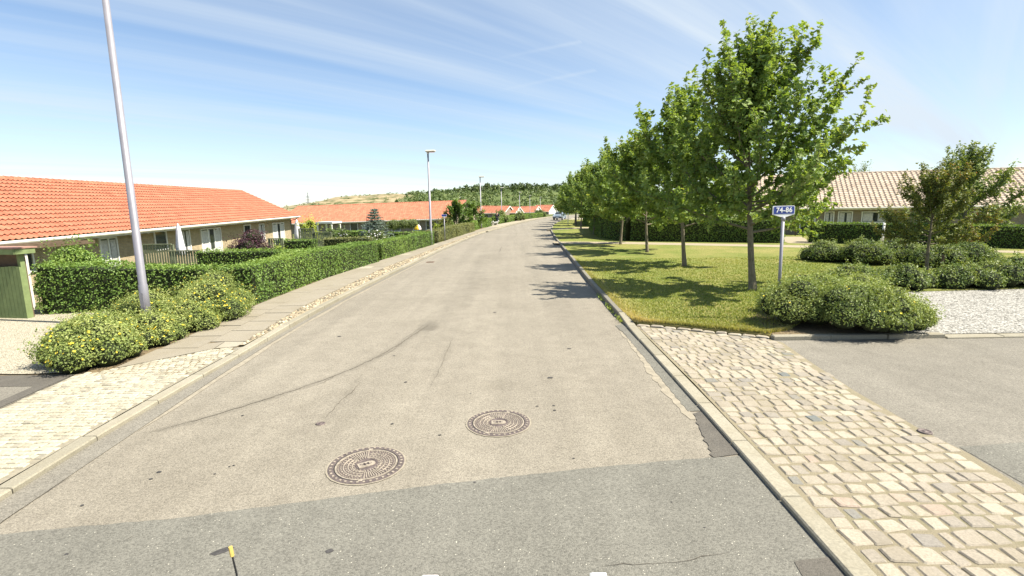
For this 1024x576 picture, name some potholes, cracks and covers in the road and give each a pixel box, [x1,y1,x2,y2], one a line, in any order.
crack [175,325,428,426]
crack [606,553,723,566]
manhole cover [325,446,406,485]
manhole cover [466,409,531,437]
